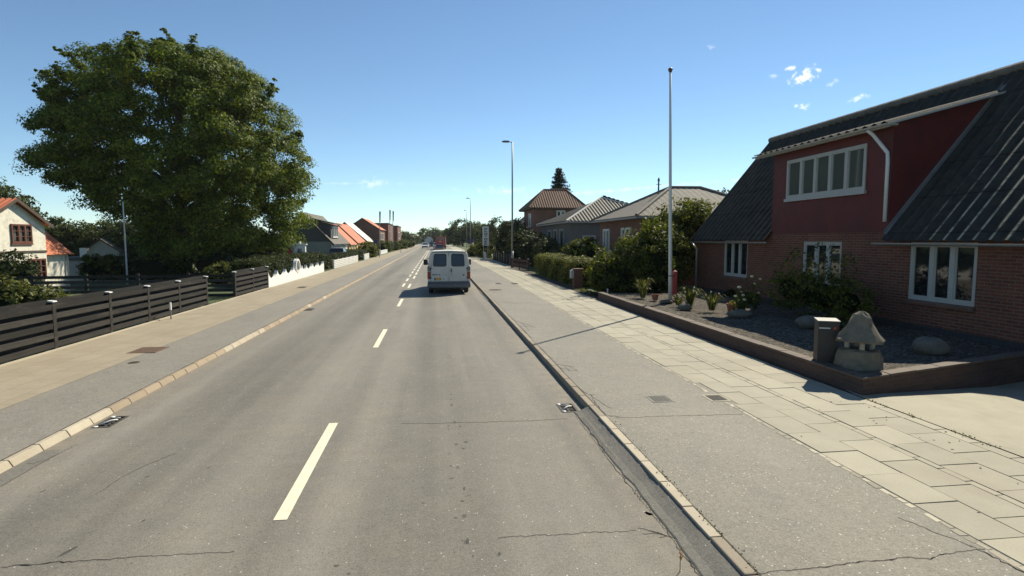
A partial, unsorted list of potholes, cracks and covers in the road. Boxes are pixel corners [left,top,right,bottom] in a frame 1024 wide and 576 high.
crack [8,551,234,567]
manhole cover [645,395,675,403]
crack [762,517,1024,574]
drain grate [91,416,129,428]
crack [500,389,725,576]
drain grate [556,403,579,413]
manhole cover [702,394,731,402]
